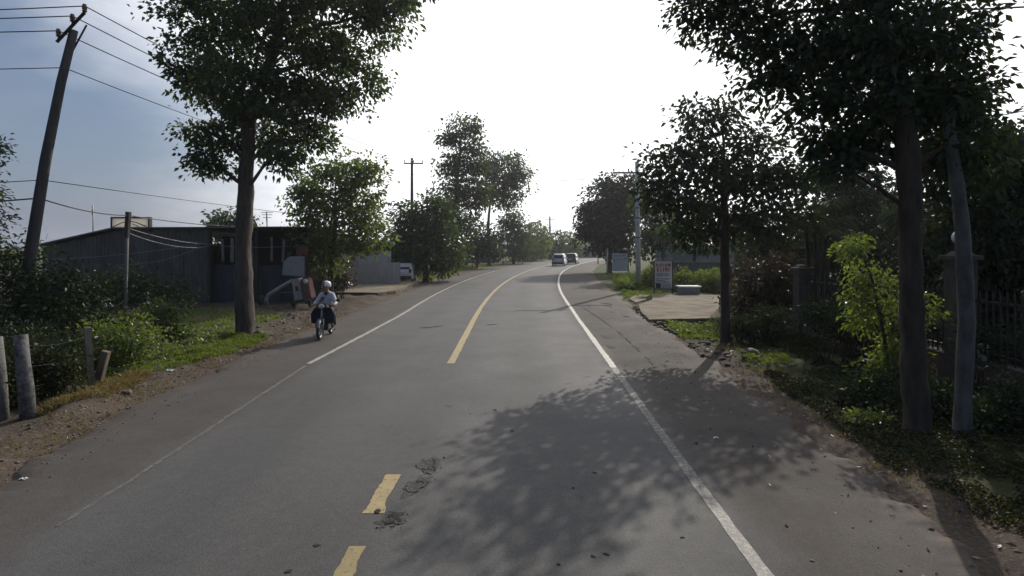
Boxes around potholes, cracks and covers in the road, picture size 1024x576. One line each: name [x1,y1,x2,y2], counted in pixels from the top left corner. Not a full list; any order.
pothole [373,515,408,525]
pothole [400,476,431,499]
pothole [415,457,440,475]
